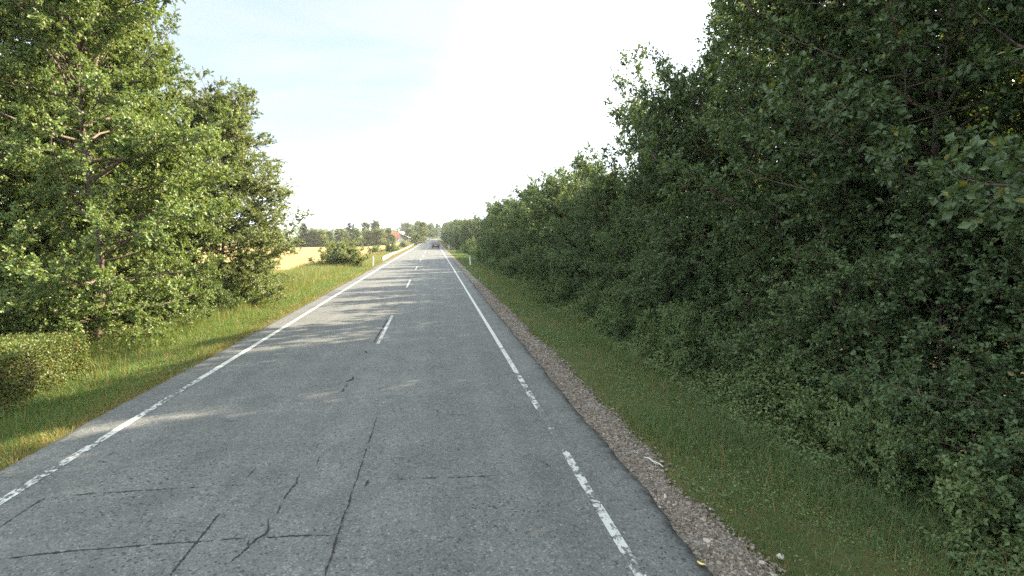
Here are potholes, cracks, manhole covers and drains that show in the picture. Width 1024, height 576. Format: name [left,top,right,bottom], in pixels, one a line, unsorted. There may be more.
crack [11,476,334,576]
crack [325,420,376,576]
